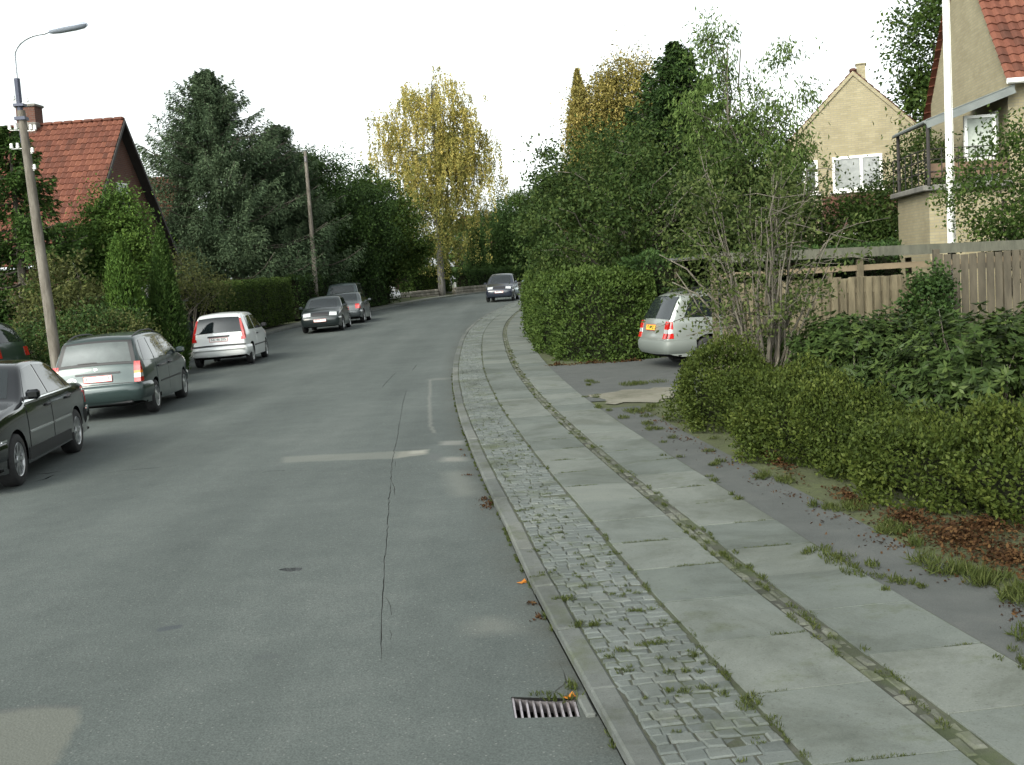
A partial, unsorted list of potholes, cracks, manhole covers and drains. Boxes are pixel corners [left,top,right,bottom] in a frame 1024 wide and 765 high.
drain grate [511,694,596,718]
crack [380,375,406,656]
